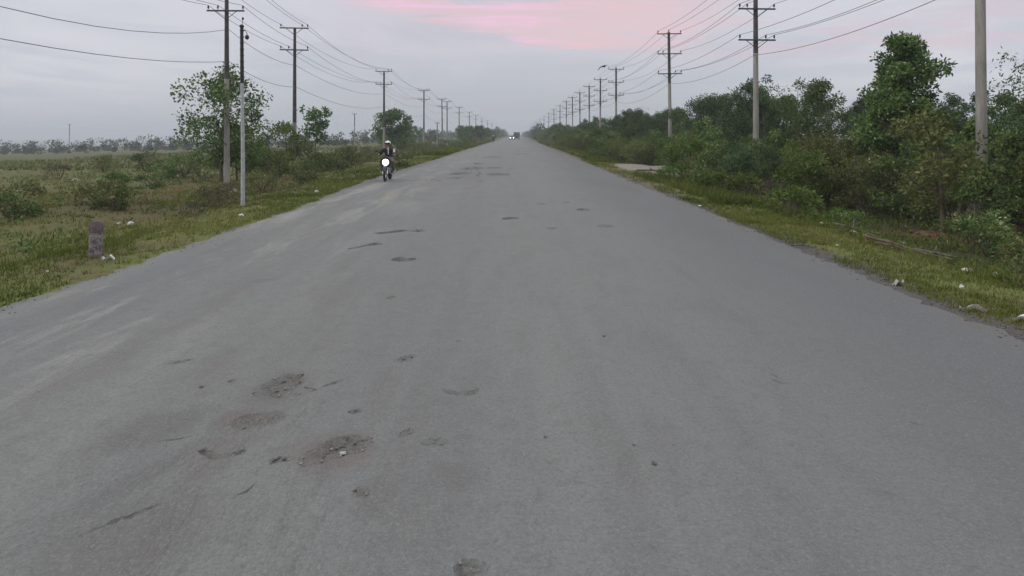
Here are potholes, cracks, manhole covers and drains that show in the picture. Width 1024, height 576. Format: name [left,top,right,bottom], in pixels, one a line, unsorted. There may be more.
pothole [297,434,374,468]
crack [72,501,166,540]
pothole [198,447,247,460]
pothole [453,559,490,576]
pothole [228,410,287,429]
pothole [442,388,481,396]
pothole [251,373,306,400]
crack [293,377,348,395]
